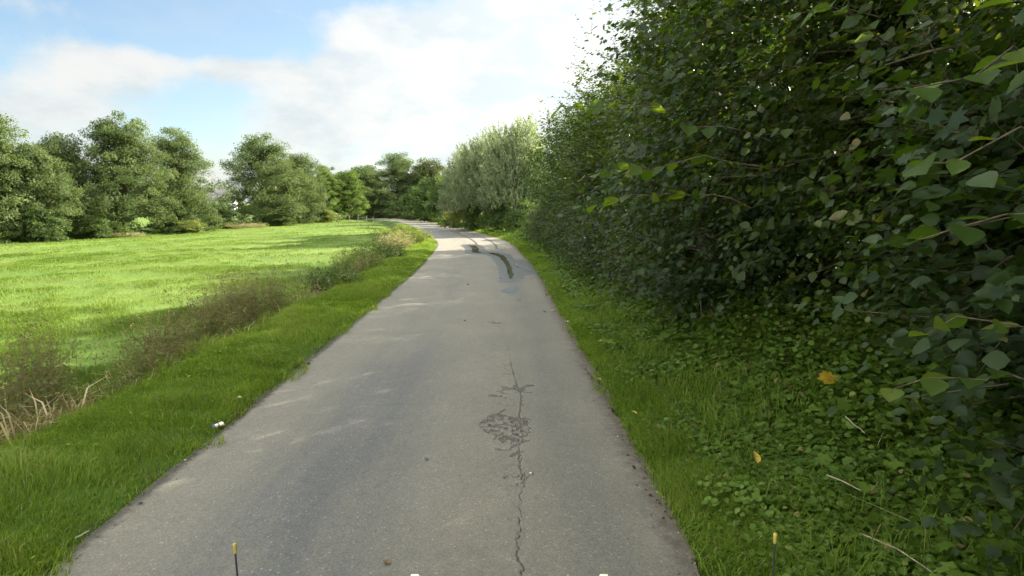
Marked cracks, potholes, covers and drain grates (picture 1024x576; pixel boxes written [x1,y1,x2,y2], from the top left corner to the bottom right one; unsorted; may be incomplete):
crack [480,349,535,576]
